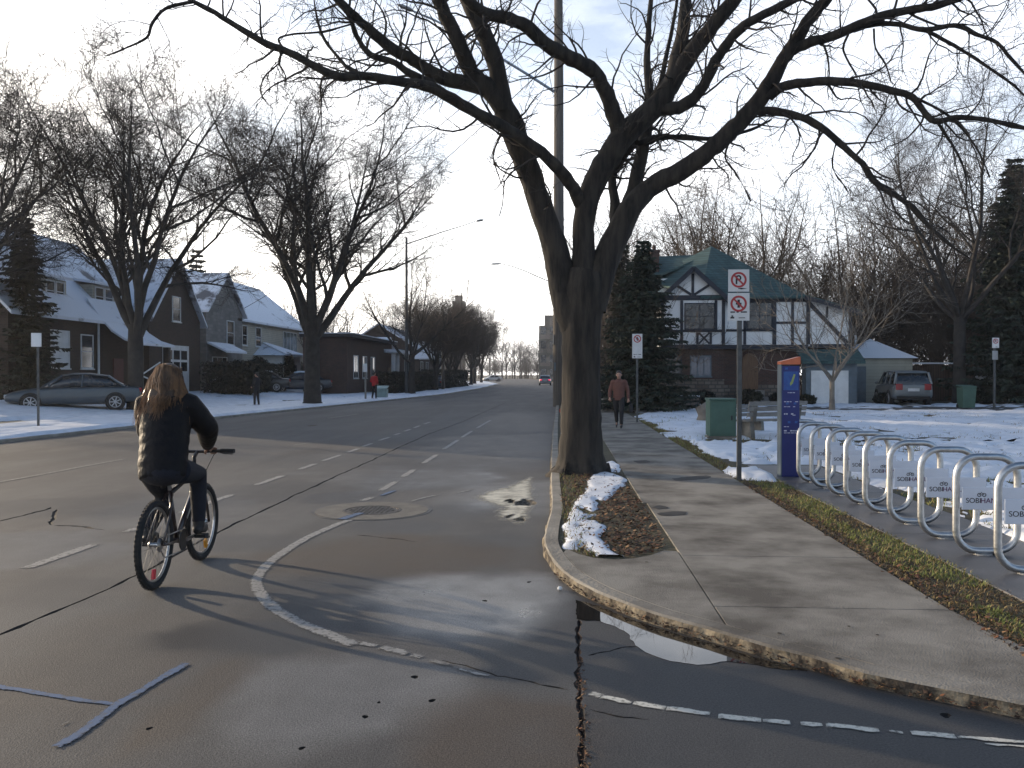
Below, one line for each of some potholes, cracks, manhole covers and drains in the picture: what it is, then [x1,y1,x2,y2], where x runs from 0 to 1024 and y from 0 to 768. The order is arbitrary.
crack [0,403,504,635]
crack [442,620,648,768]
manhole cover [311,501,432,521]
